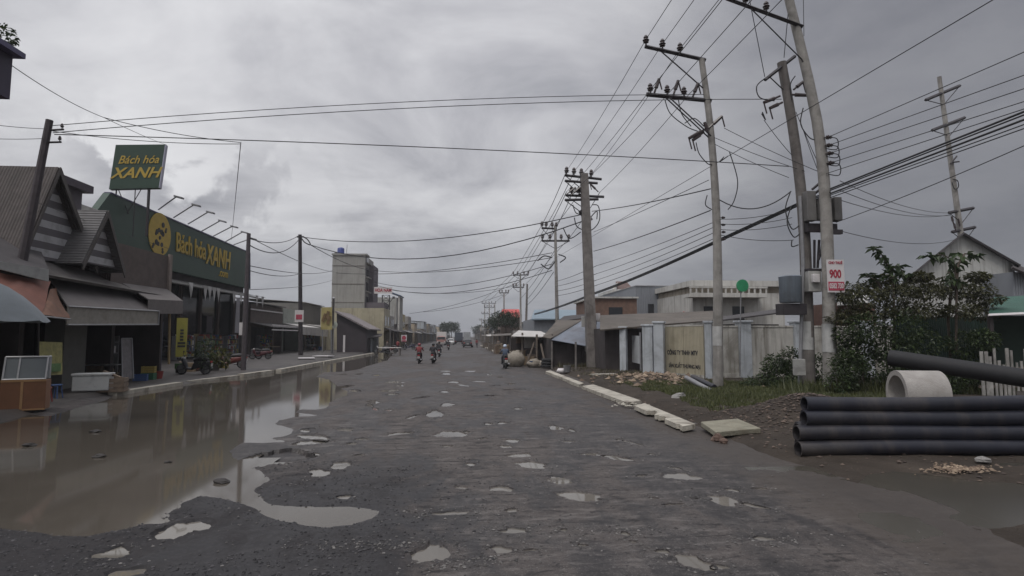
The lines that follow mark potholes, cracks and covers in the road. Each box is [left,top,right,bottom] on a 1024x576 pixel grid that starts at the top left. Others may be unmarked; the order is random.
pothole [306,467,333,477]
pothole [88,545,133,558]
pothole [510,461,549,469]
pothole [706,494,744,507]
pothole [544,474,574,485]
pothole [149,517,217,539]
pothole [241,448,318,462]
pothole [296,433,332,442]
pothole [550,490,607,502]
pothole [673,552,718,571]
pothole [410,540,454,562]
pothole [658,471,707,480]
